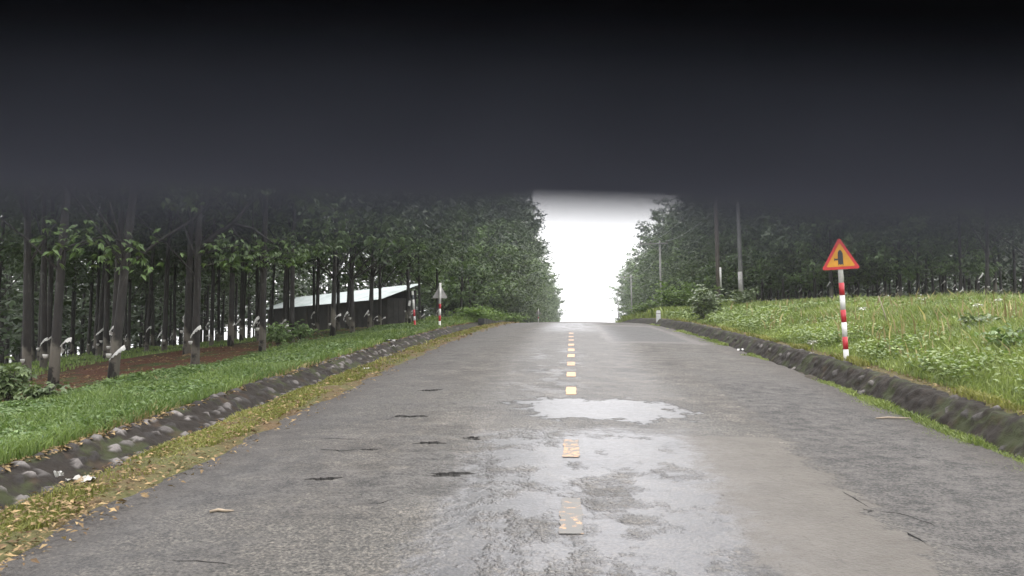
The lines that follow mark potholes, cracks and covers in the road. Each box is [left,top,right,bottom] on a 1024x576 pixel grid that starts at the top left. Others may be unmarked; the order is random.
crack [844,492,935,543]
